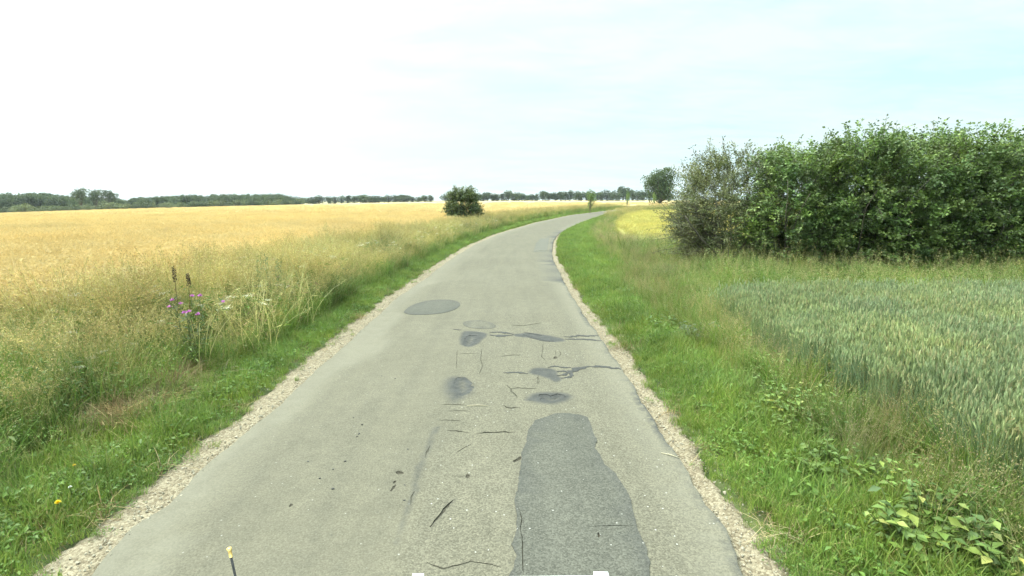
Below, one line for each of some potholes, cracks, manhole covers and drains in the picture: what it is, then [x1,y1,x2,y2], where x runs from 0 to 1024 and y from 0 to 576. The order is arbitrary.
crack [429,498,457,530]
crack [428,561,499,570]
